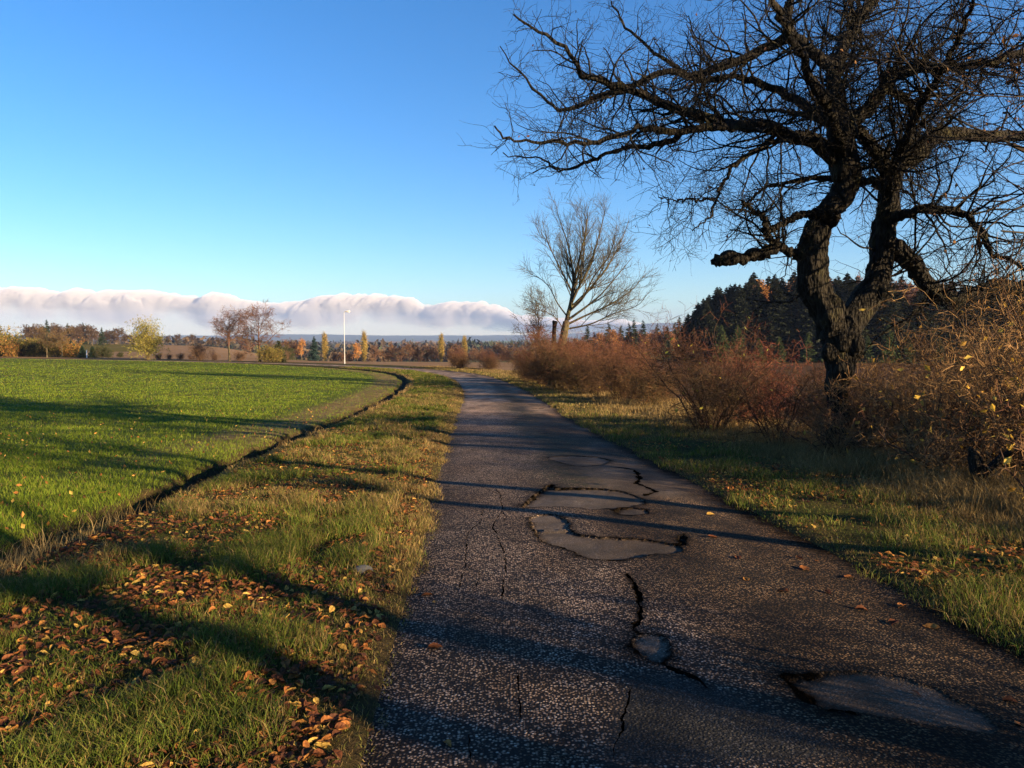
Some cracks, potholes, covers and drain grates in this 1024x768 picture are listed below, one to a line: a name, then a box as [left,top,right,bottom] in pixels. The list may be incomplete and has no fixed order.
crack [459,488,507,600]
crack [666,665,706,686]
pothole [528,514,684,560]
pothole [521,485,645,509]
pothole [632,633,673,663]
pothole [780,670,1002,734]
pothole [547,456,610,466]
pothole [614,507,649,515]
crack [625,574,644,629]
